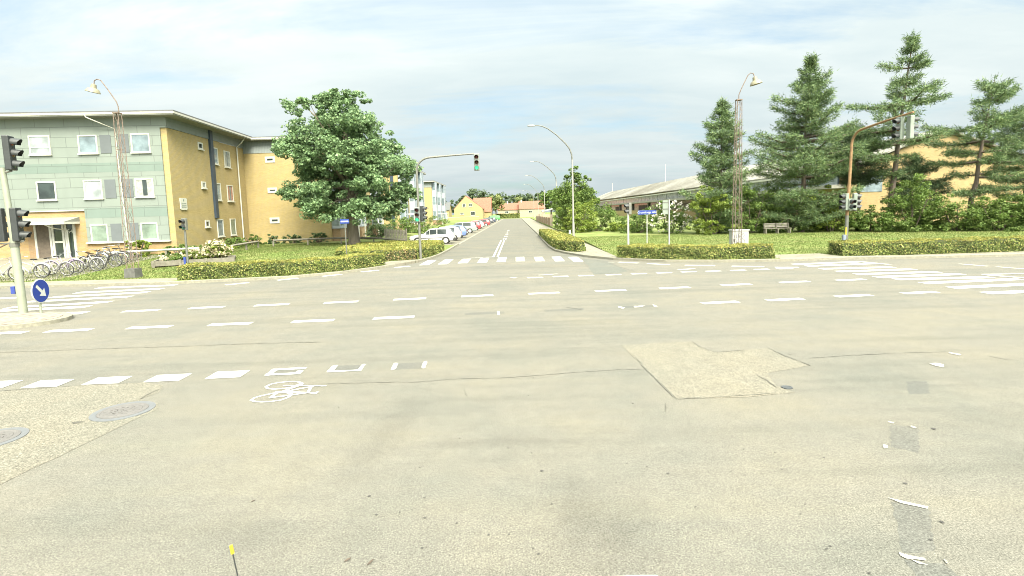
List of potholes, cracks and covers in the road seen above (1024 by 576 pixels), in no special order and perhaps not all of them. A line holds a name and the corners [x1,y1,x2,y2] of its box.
manhole cover [88,401,156,422]
